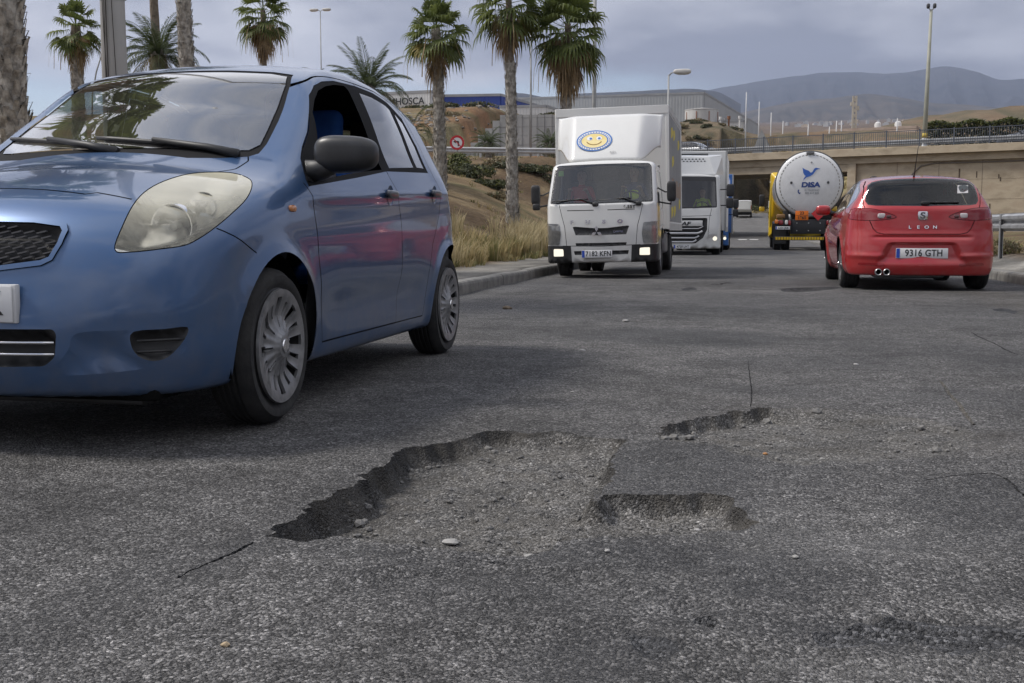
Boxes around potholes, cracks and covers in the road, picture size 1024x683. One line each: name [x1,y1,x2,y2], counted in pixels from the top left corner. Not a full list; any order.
crack [915,473,1024,495]
crack [178,542,256,578]
pothole [264,431,759,556]
